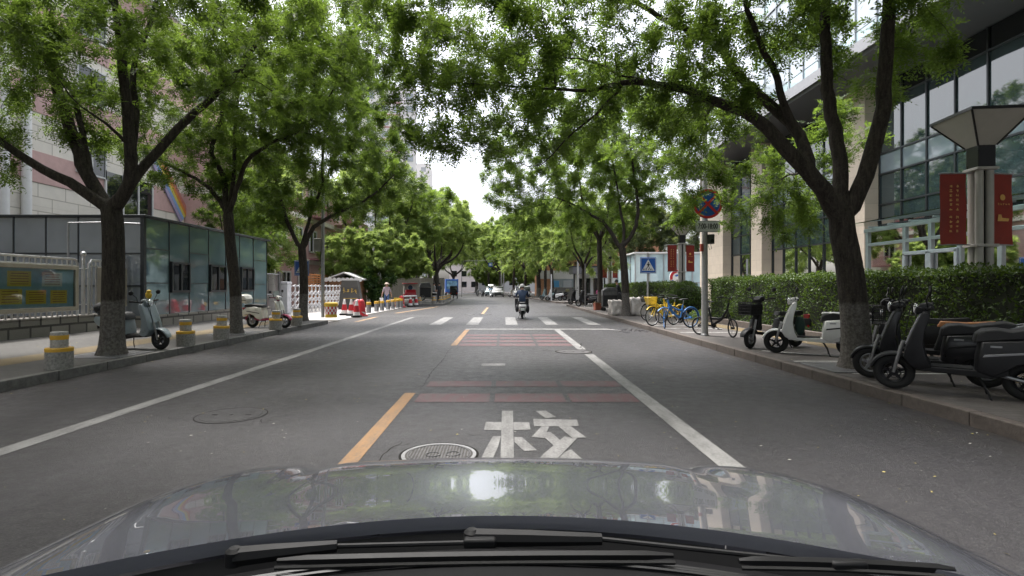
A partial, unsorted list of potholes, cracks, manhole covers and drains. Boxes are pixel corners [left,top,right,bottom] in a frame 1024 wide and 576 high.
manhole cover [398,443,479,460]
manhole cover [193,407,268,424]
